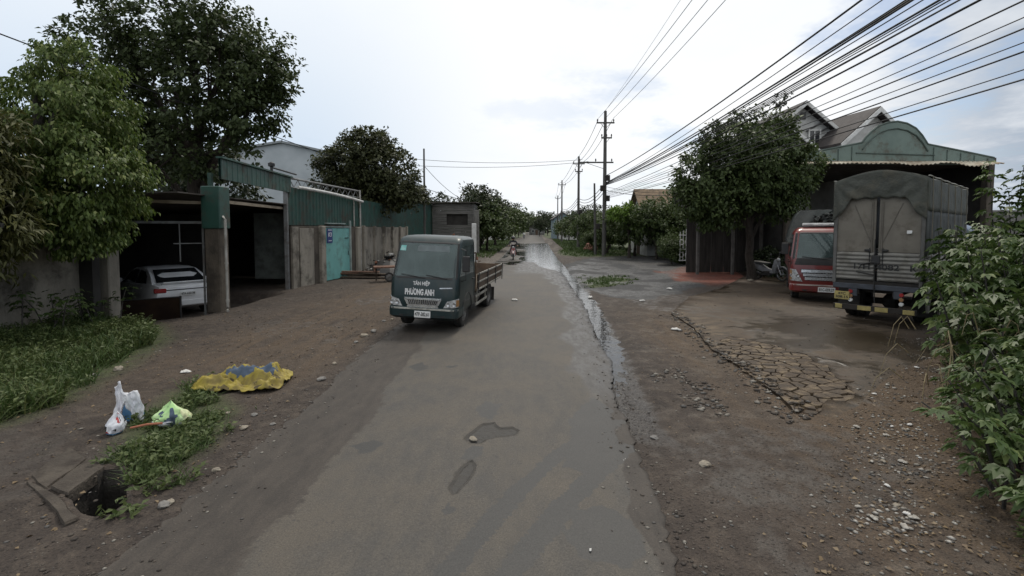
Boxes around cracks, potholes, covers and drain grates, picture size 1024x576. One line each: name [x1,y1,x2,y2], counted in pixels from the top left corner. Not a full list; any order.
crack [710,326,859,414]
pothole [449,459,477,494]
pothole [464,422,520,443]
